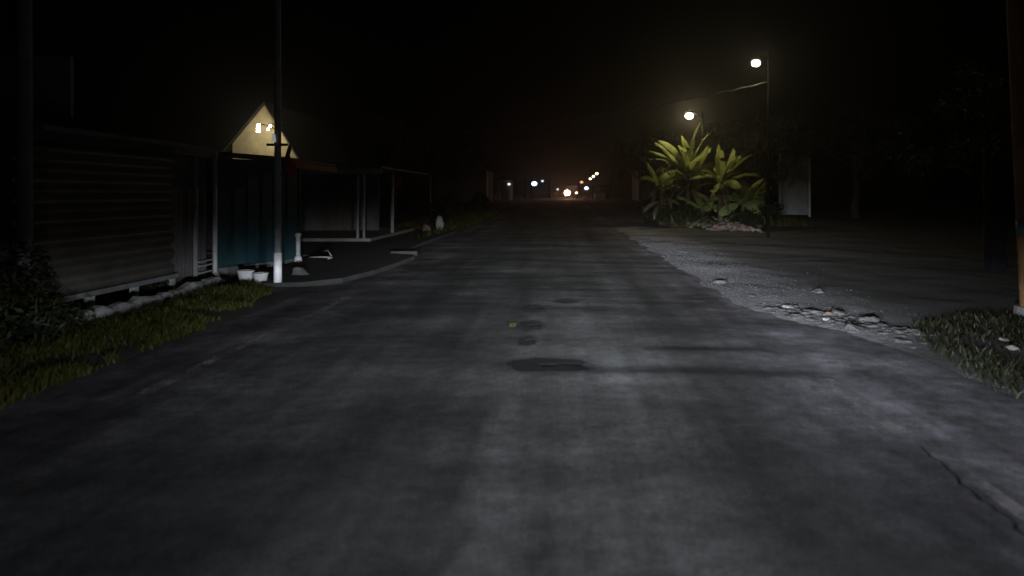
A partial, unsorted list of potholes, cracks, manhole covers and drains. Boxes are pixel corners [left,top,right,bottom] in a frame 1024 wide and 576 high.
pothole [520,320,543,332]
pothole [506,358,591,372]
pothole [523,305,545,313]
pothole [518,335,537,346]
crack [915,442,1024,536]
